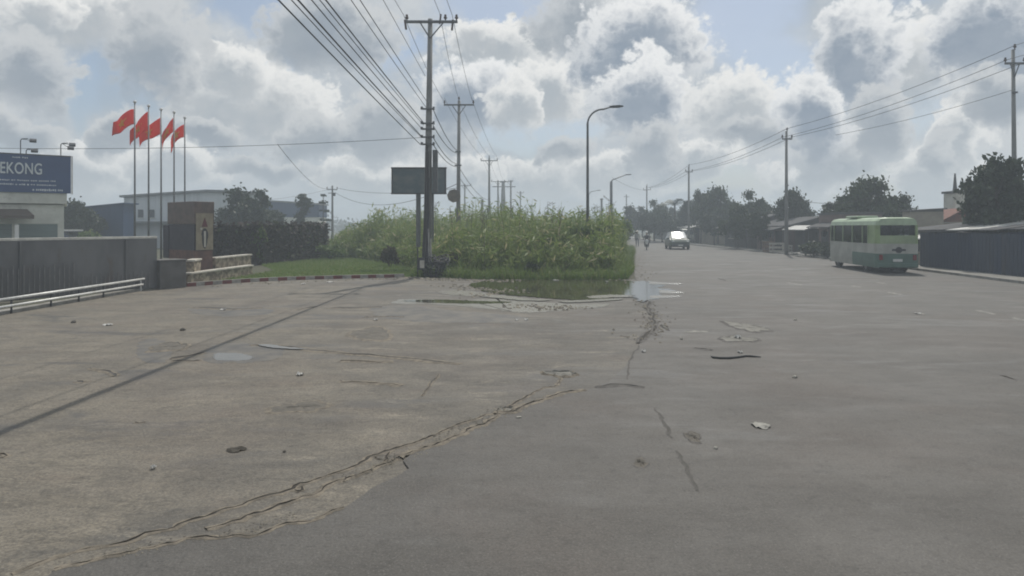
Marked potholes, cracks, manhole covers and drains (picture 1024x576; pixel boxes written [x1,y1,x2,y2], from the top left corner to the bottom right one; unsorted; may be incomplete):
crack [653,408,699,491]
crack [0,344,563,575]
crack [620,300,661,343]
pothole [682,431,702,444]
pothole [540,370,579,378]
